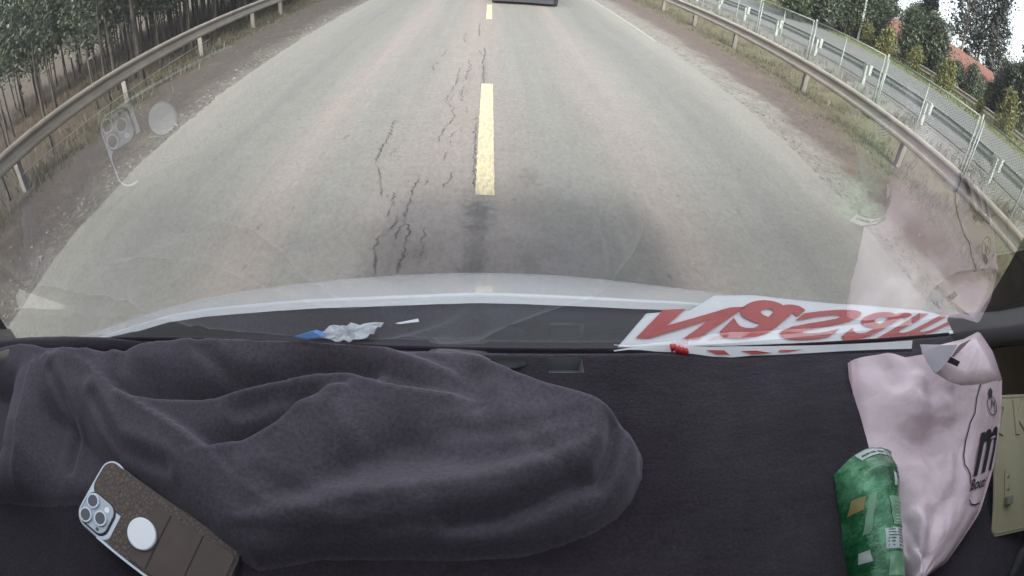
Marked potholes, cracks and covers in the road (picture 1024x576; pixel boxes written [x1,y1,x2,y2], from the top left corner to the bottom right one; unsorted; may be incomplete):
crack [372,24,486,275]
